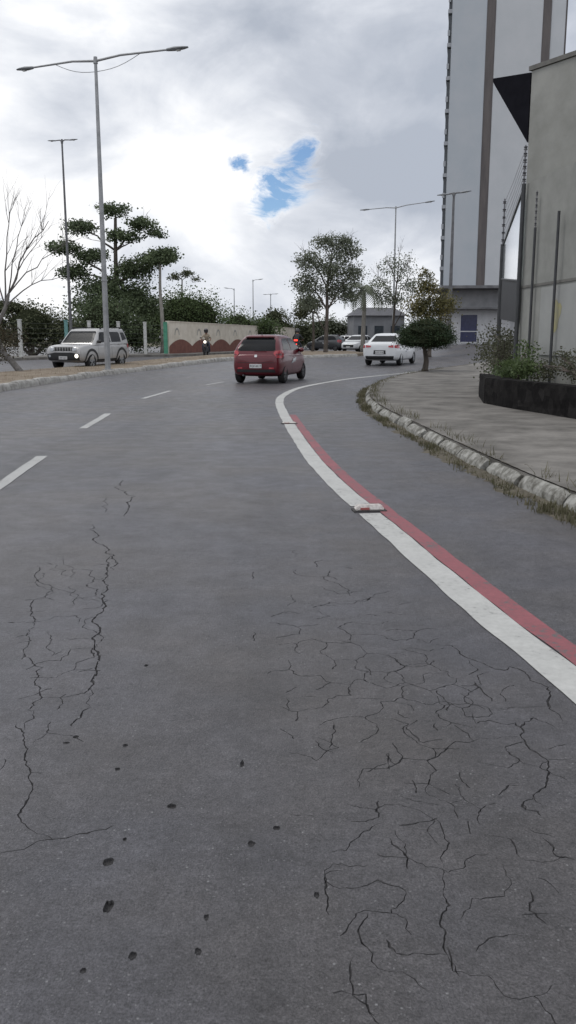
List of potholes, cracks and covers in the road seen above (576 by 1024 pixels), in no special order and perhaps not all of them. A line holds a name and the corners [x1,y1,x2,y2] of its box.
crack [0,527,118,854]
crack [269,550,570,1024]
